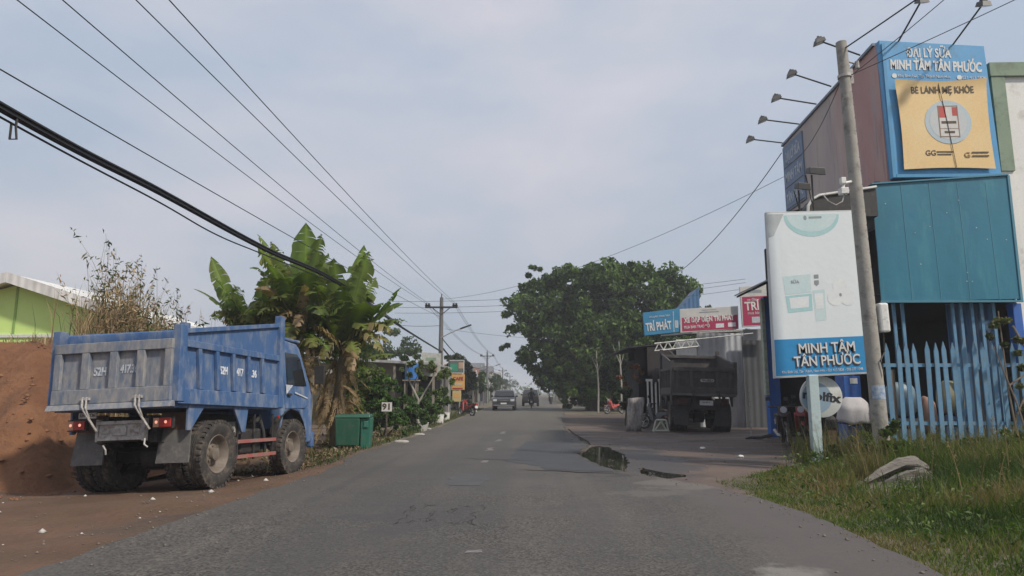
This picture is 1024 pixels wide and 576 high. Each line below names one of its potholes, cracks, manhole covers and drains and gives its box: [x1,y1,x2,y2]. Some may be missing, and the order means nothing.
pothole [577,446,630,472]
pothole [639,468,686,479]
crack [394,505,485,525]
